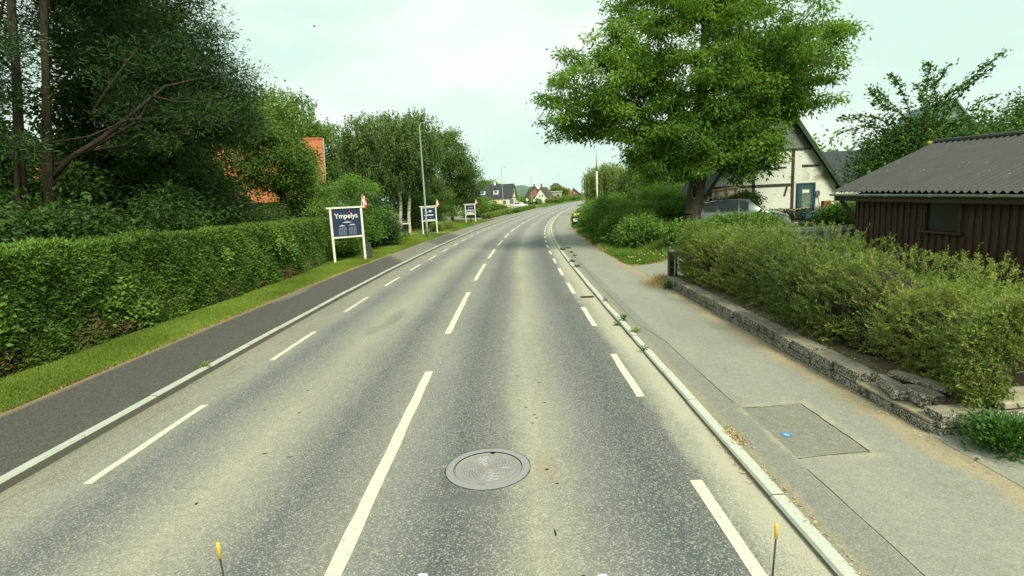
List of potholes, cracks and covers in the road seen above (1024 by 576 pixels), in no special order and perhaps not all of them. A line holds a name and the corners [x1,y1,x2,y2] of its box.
manhole cover [445,448,530,490]
